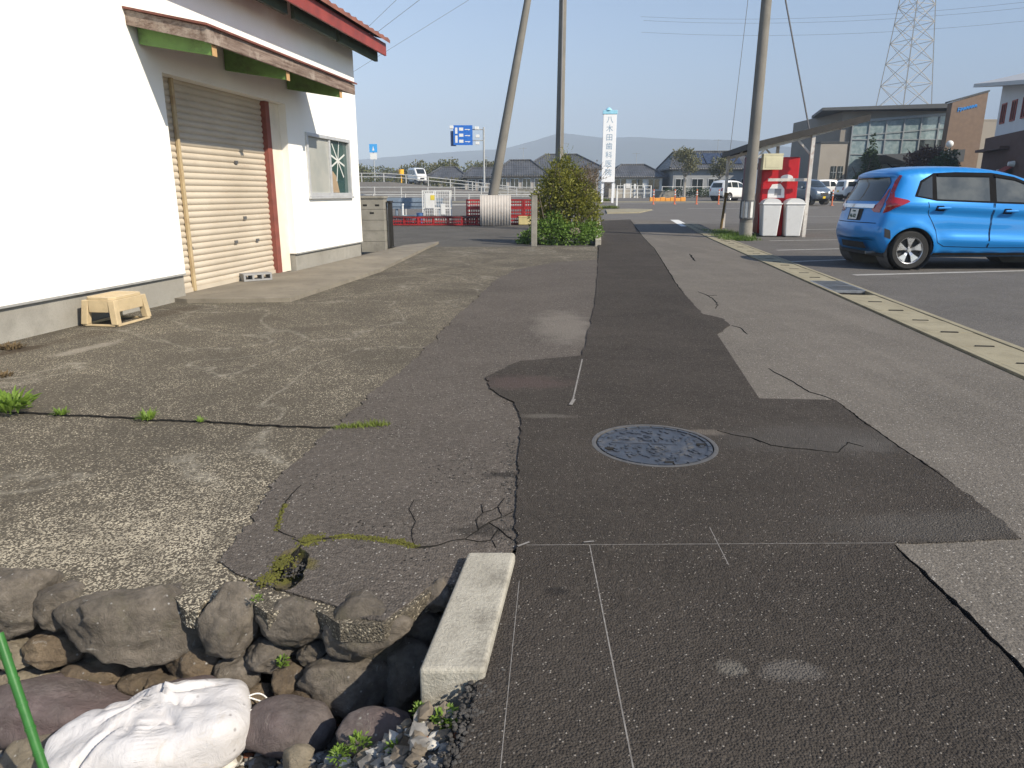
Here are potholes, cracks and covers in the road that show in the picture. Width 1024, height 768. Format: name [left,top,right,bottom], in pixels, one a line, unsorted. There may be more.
drain grate [811,281,866,293]
crack [717,368,950,482]
manhole cover [592,424,719,467]
crack [276,484,514,573]
